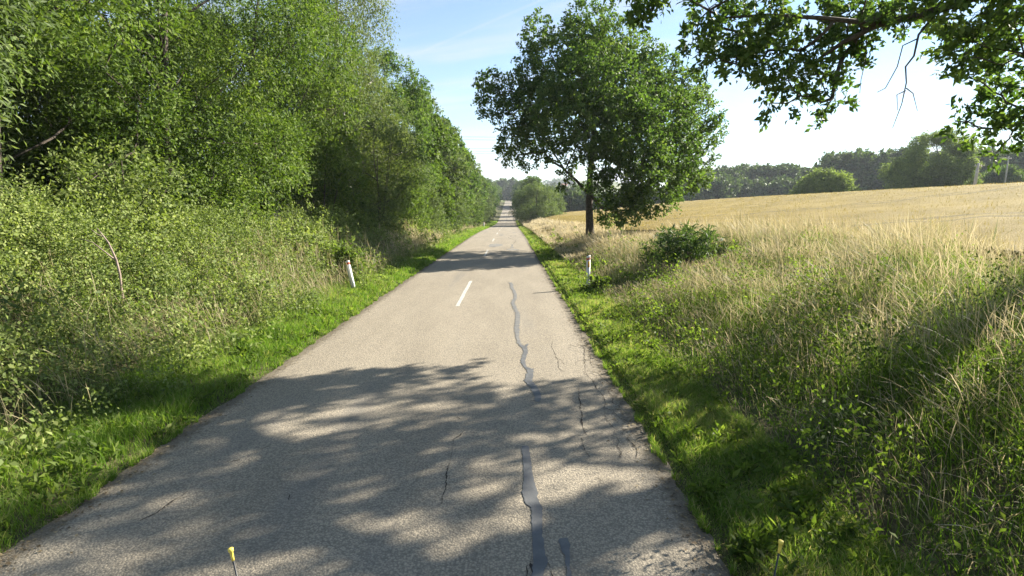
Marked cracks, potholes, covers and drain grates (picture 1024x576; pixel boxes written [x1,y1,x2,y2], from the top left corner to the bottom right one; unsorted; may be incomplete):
crack [577,335,637,457]
crack [510,282,563,402]
crack [441,417,463,504]
